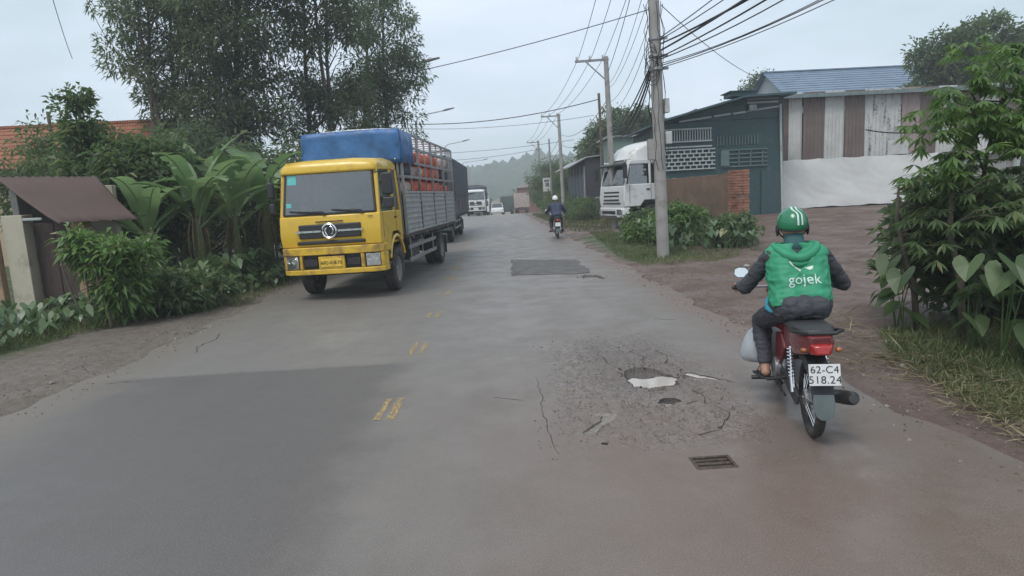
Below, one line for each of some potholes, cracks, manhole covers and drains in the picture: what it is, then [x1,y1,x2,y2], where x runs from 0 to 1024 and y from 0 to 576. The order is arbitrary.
pothole [618,363,693,391]
crack [603,351,730,435]
crack [494,380,559,454]
pothole [684,372,736,383]
drain grate [688,455,739,470]
